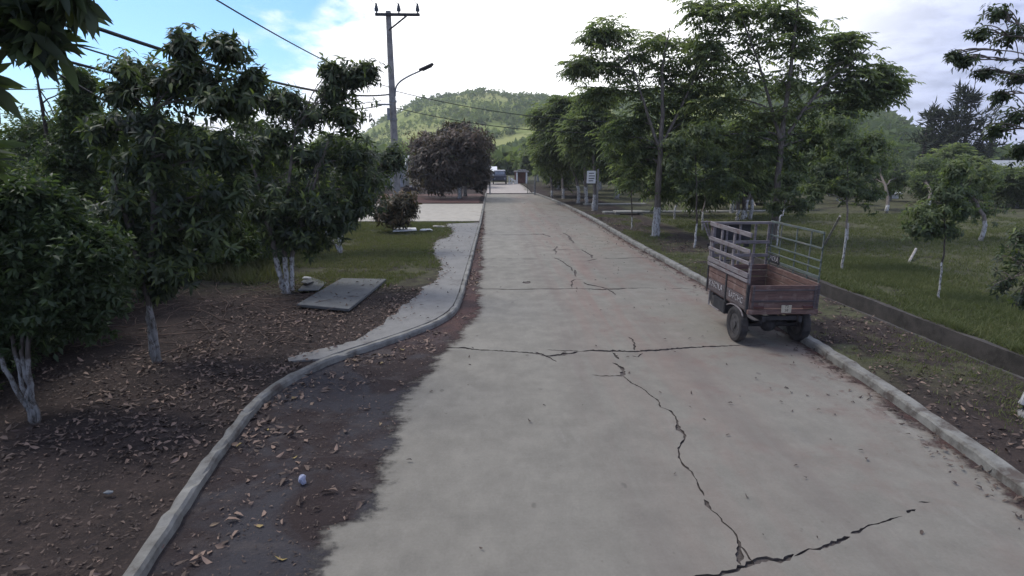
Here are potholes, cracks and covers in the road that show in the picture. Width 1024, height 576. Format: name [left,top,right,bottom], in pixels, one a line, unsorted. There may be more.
crack [596,353,928,576]
crack [554,233,593,276]
